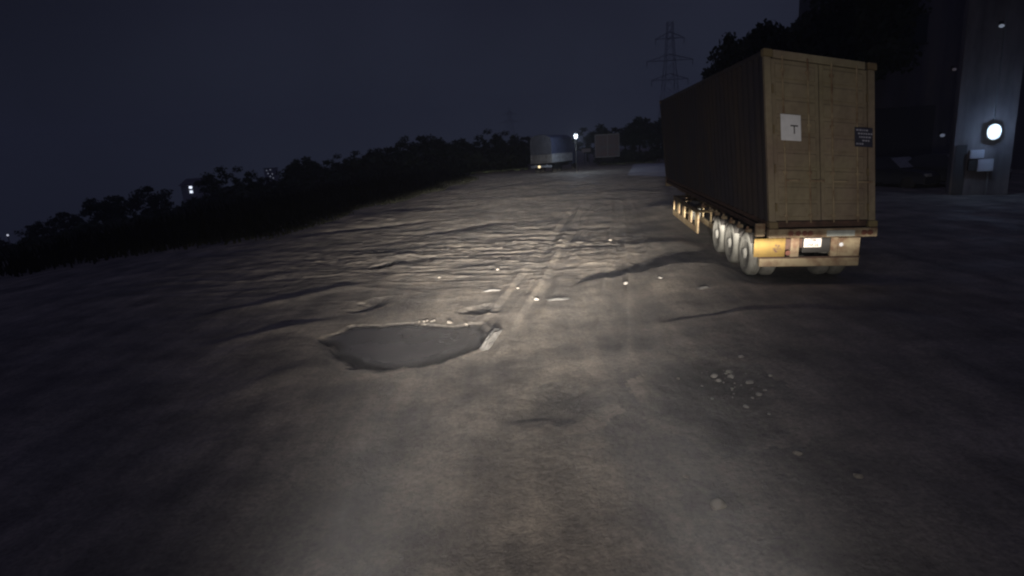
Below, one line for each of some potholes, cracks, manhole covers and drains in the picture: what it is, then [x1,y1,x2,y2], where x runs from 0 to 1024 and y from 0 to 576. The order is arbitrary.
pothole [492,381,627,437]
pothole [313,320,504,374]
